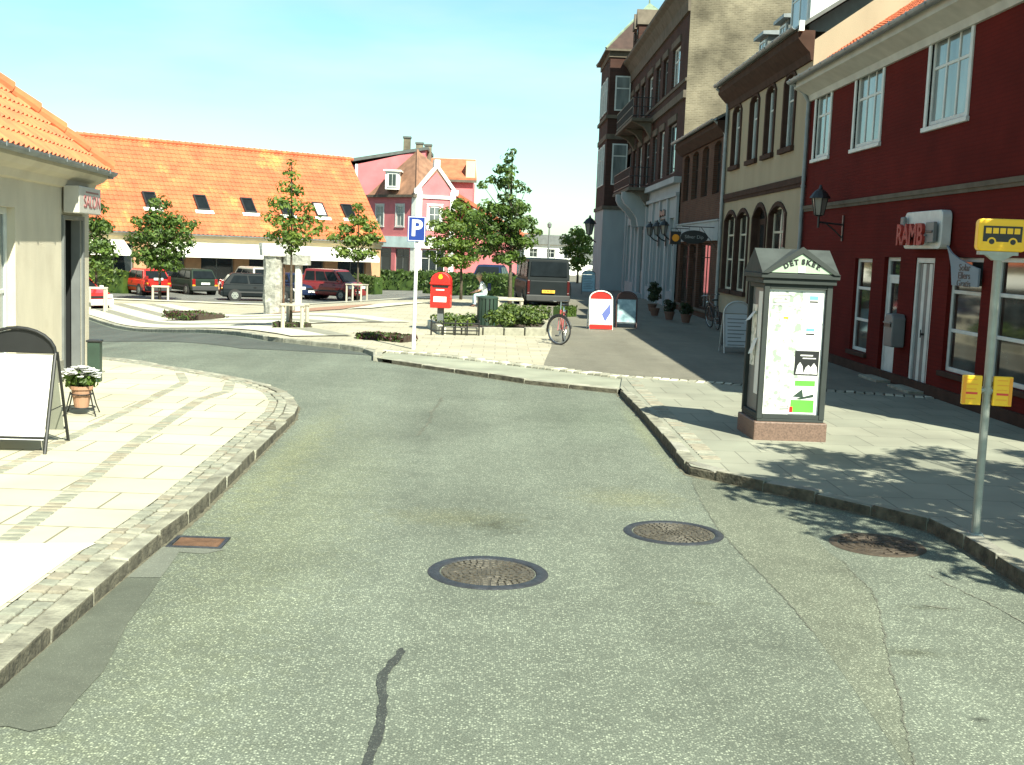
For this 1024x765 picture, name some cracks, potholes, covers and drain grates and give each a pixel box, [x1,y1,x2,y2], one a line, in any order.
manhole cover [623,520,724,546]
manhole cover [427,556,548,590]
crack [416,397,443,436]
crack [926,574,1024,623]
manhole cover [828,533,927,557]
